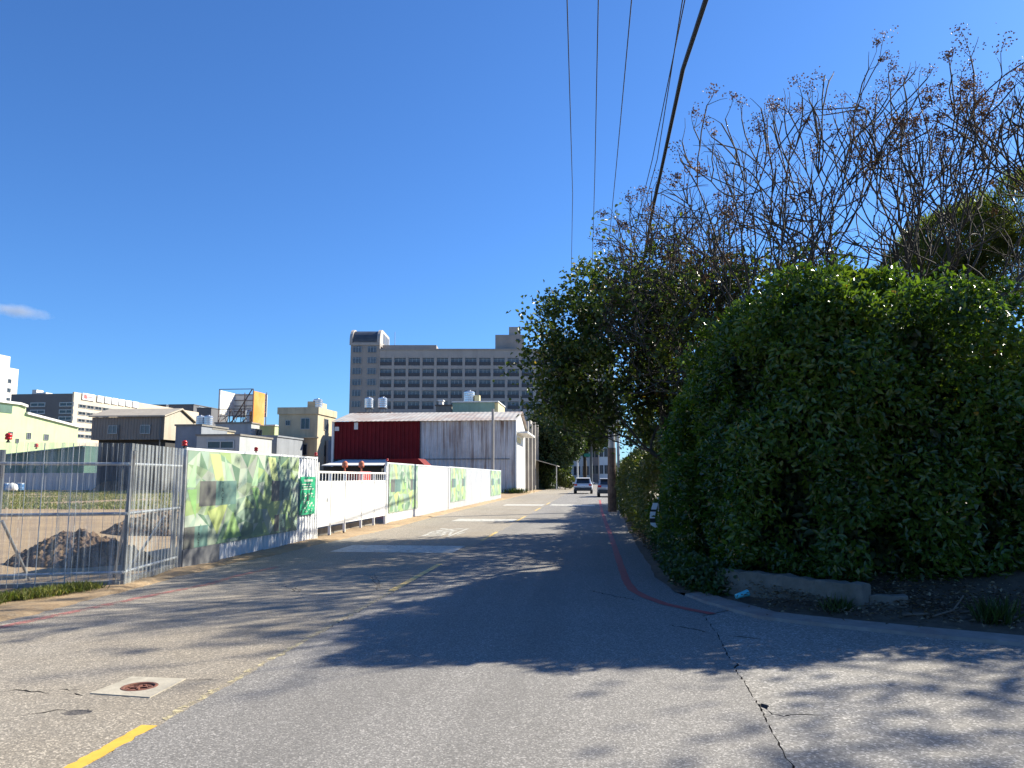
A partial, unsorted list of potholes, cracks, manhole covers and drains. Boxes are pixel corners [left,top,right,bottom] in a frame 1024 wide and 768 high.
manhole cover [90,676,186,698]
crack [3,689,87,716]
